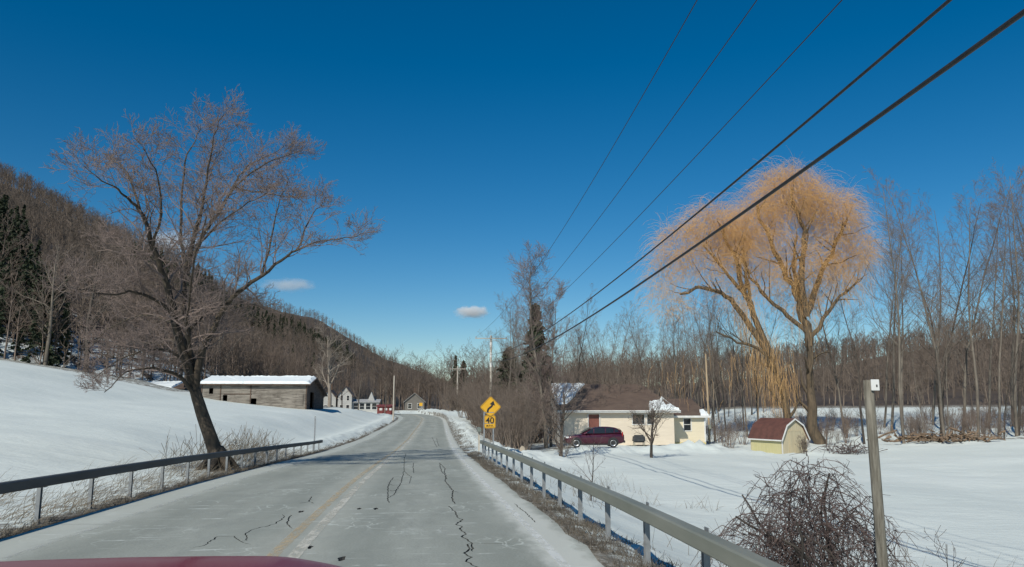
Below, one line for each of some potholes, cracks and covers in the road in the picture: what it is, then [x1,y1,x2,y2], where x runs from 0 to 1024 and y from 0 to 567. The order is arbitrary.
crack [387,456,414,503]
crack [199,497,313,547]
crack [439,464,504,567]
